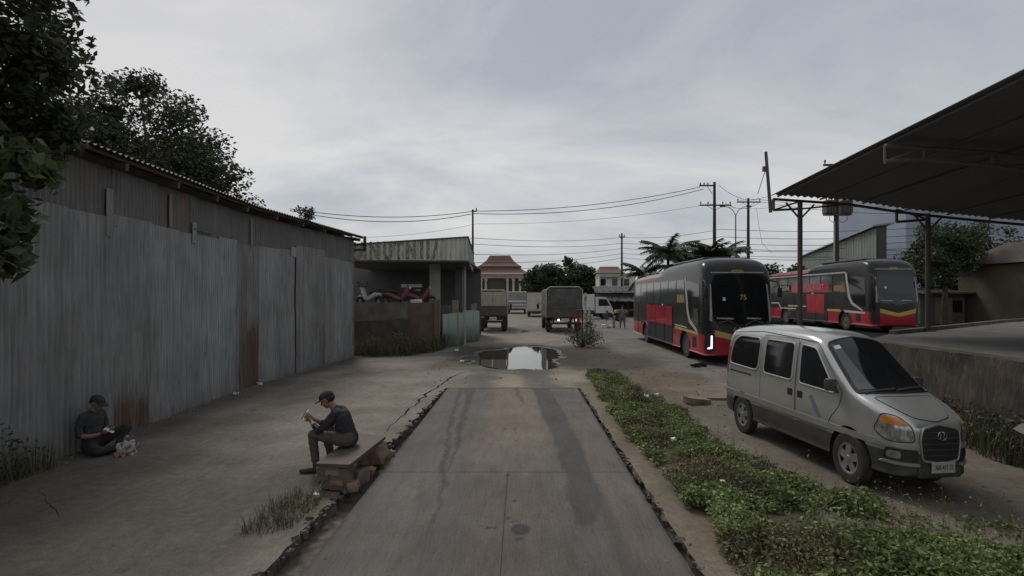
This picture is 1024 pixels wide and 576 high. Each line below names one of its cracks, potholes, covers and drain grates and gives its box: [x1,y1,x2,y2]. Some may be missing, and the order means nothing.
pothole [454,345,568,370]
crack [384,370,469,434]
